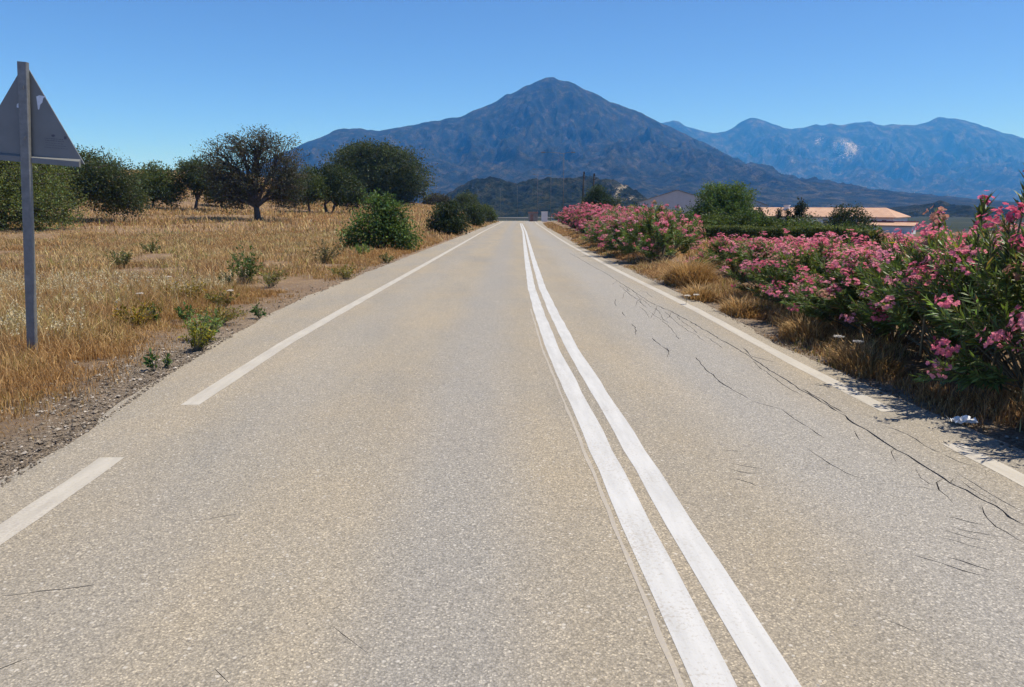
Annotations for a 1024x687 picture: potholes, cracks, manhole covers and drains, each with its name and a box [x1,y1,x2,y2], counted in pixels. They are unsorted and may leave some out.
crack [579,258,1022,633]
crack [3,584,95,596]
